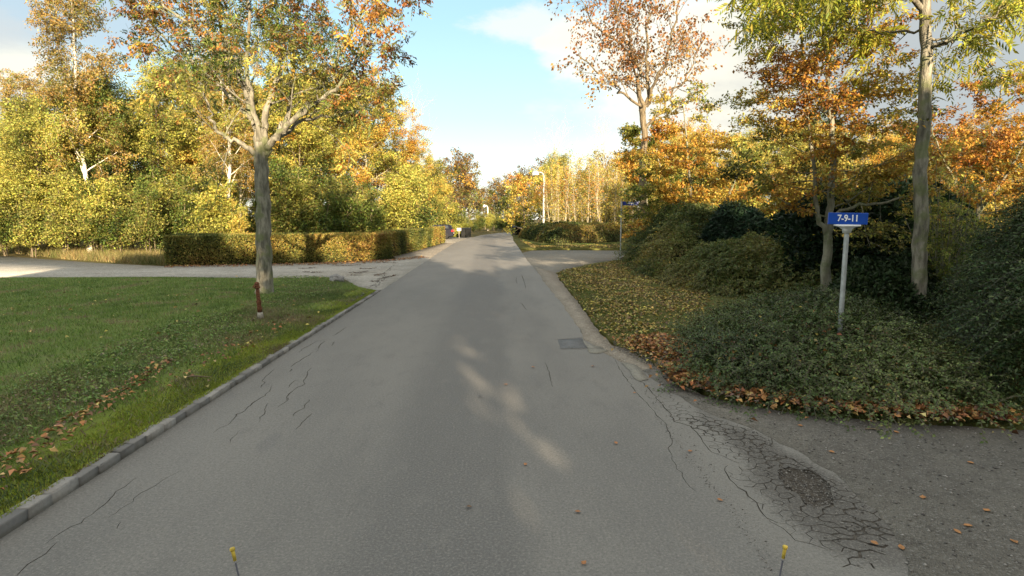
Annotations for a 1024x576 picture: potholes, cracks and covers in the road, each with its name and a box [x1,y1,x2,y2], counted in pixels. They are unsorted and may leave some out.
crack [18,470,181,574]
crack [213,329,344,443]
pothole [778,466,833,509]
crack [616,362,894,569]
